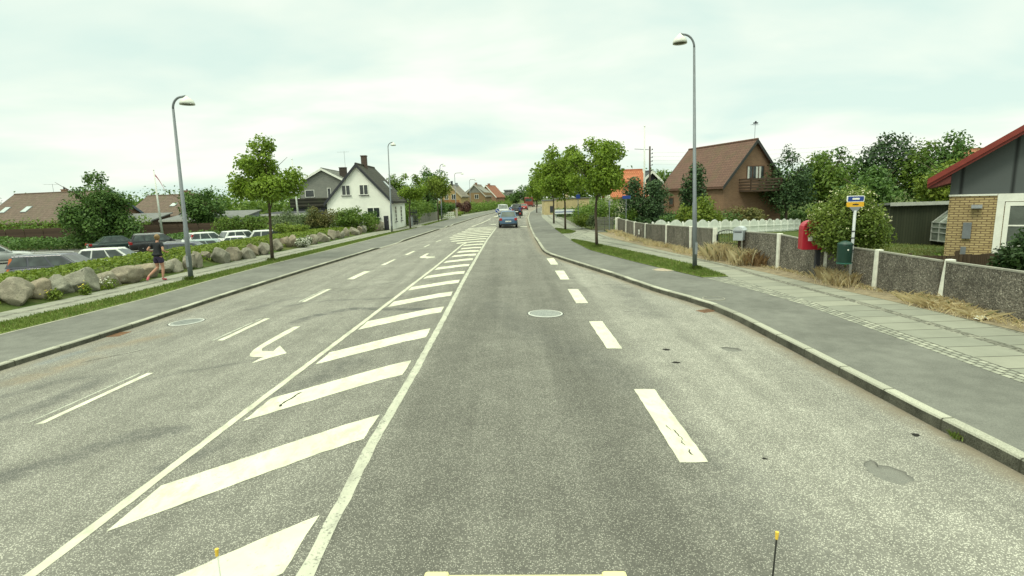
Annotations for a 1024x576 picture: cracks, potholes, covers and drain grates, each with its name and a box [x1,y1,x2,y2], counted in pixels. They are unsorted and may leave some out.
manhole cover [527,310,564,318]
manhole cover [167,318,206,326]
